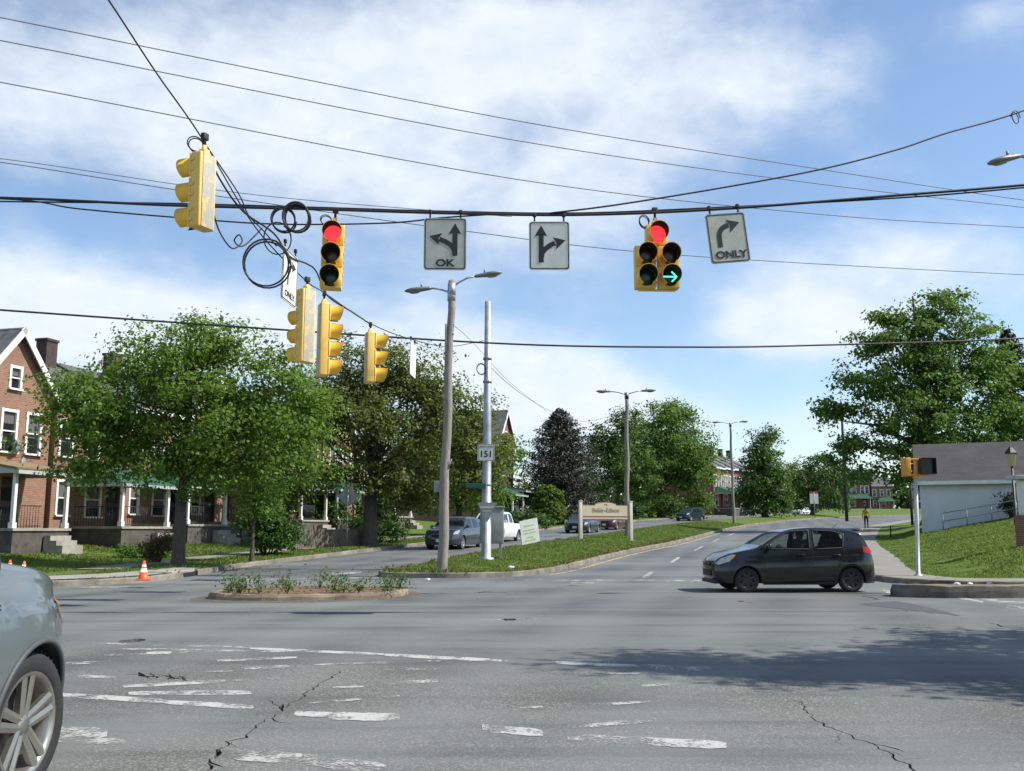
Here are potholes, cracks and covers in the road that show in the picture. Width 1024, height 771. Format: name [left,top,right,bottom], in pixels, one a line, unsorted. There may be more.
crack [130,672,188,681]
crack [204,671,341,771]
crack [794,700,918,771]
